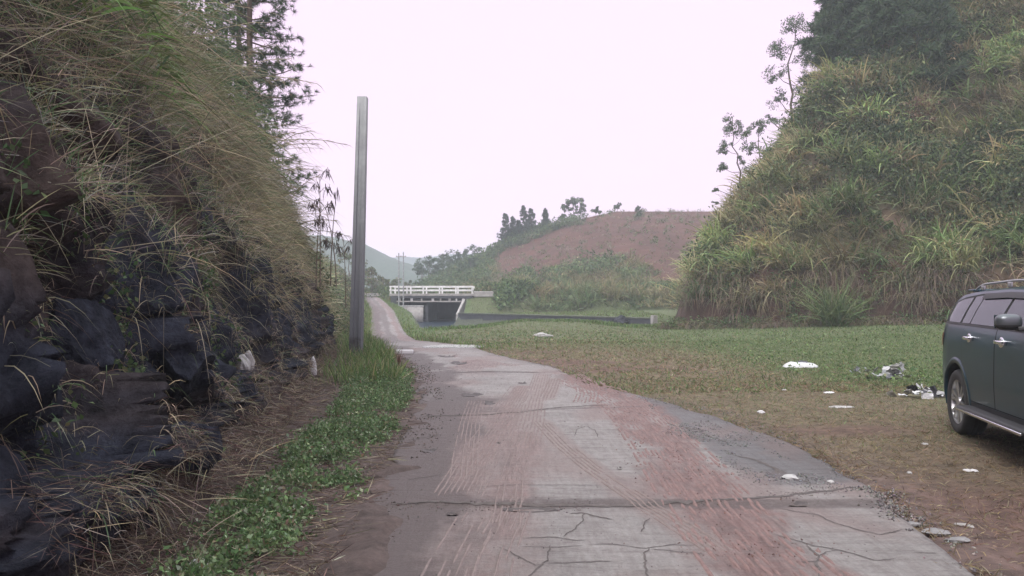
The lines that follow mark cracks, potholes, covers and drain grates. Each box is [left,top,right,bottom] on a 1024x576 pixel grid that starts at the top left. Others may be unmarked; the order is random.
crack [781,508,906,534]
crack [776,534,894,576]
crack [505,512,702,576]
